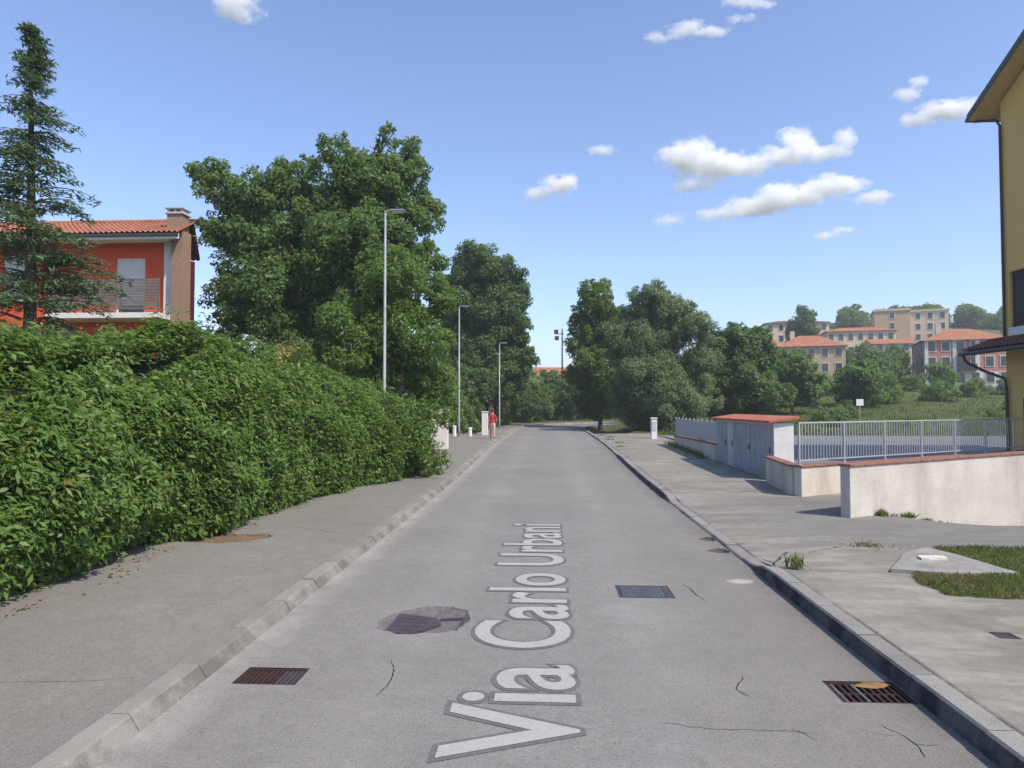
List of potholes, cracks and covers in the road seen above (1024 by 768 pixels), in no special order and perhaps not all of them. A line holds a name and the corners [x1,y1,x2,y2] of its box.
manhole cover [615,586,675,598]
drain grate [233,668,309,685]
crack [867,724,939,758]
pothole [376,606,470,633]
drain grate [823,682,917,704]
crack [666,723,820,740]
